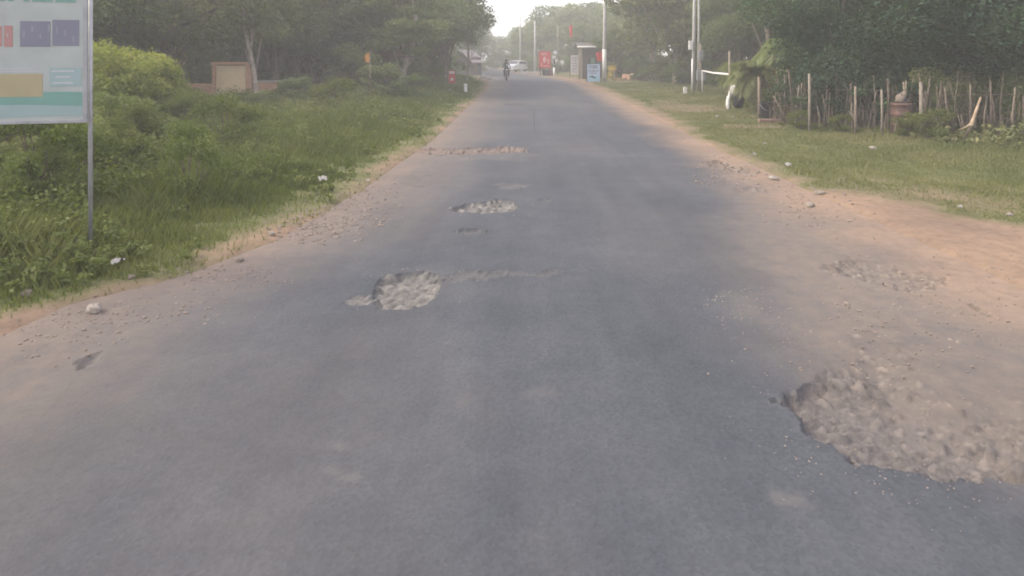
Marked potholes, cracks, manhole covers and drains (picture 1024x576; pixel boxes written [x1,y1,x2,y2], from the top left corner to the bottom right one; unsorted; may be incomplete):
pothole [448,199,520,214]
pothole [341,294,377,306]
pothole [371,270,442,311]
pothole [418,145,529,155]
pothole [819,256,952,293]
pothole [71,350,107,371]
pothole [768,327,1024,485]
